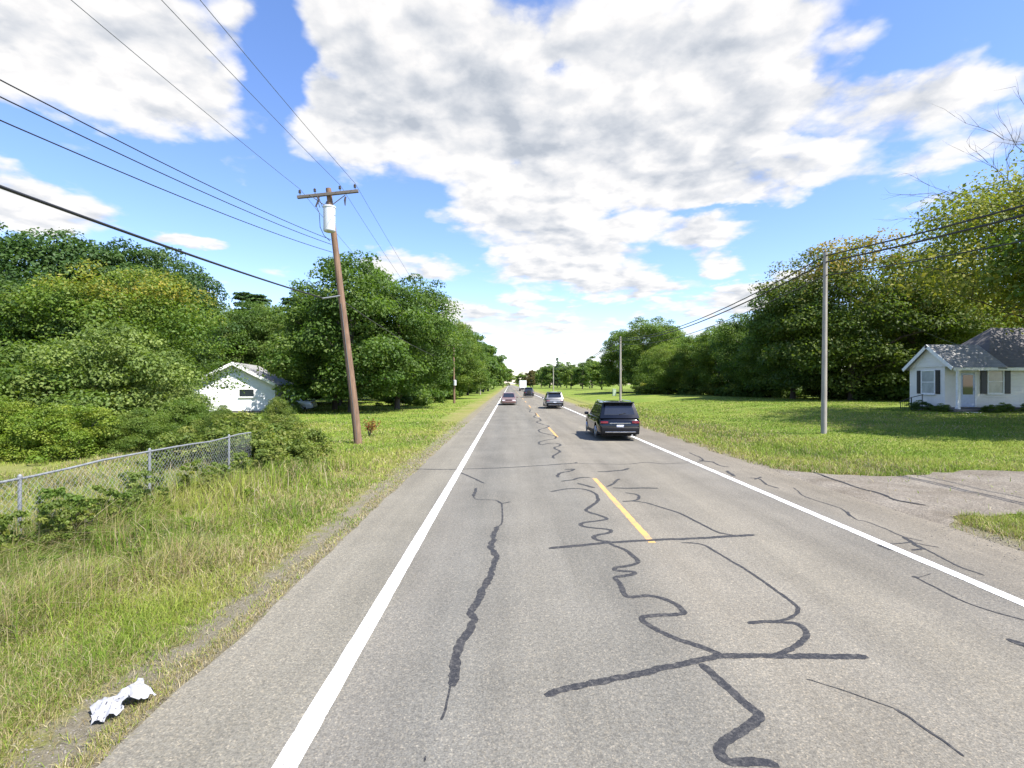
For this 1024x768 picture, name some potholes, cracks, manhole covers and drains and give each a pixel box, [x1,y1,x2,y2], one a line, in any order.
crack [808,679,964,756]
